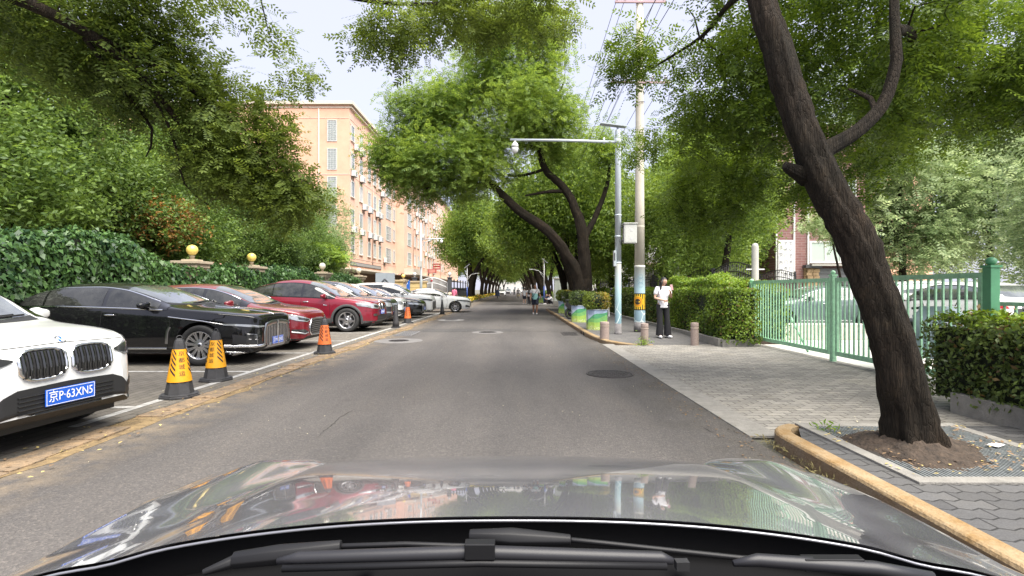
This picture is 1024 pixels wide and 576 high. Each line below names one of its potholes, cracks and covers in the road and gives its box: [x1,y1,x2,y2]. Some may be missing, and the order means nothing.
manhole cover [586,370,633,378]
